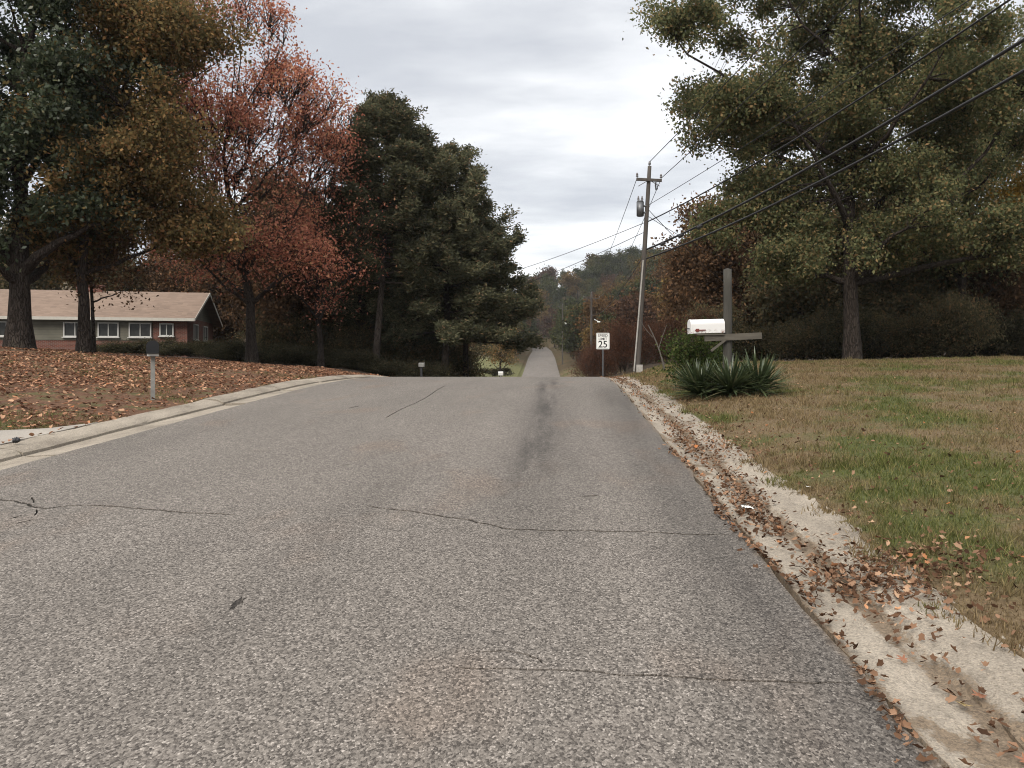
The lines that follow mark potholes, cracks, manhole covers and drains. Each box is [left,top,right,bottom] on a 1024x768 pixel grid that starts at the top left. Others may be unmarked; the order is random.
crack [1,499,224,518]
